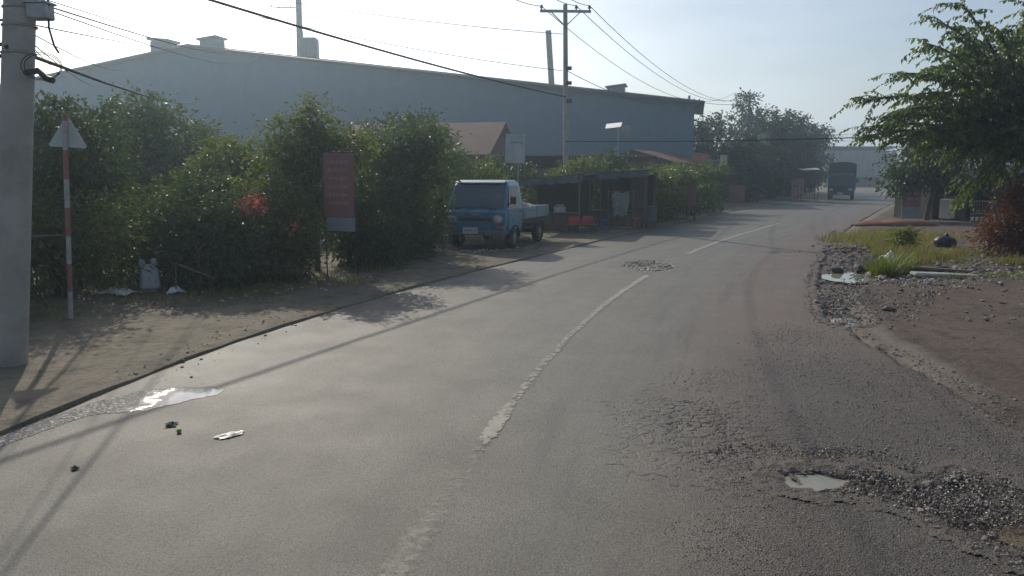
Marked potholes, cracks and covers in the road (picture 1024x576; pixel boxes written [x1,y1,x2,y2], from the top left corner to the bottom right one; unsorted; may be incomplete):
pothole [741,457,1024,575]
crack [597,381,825,492]
